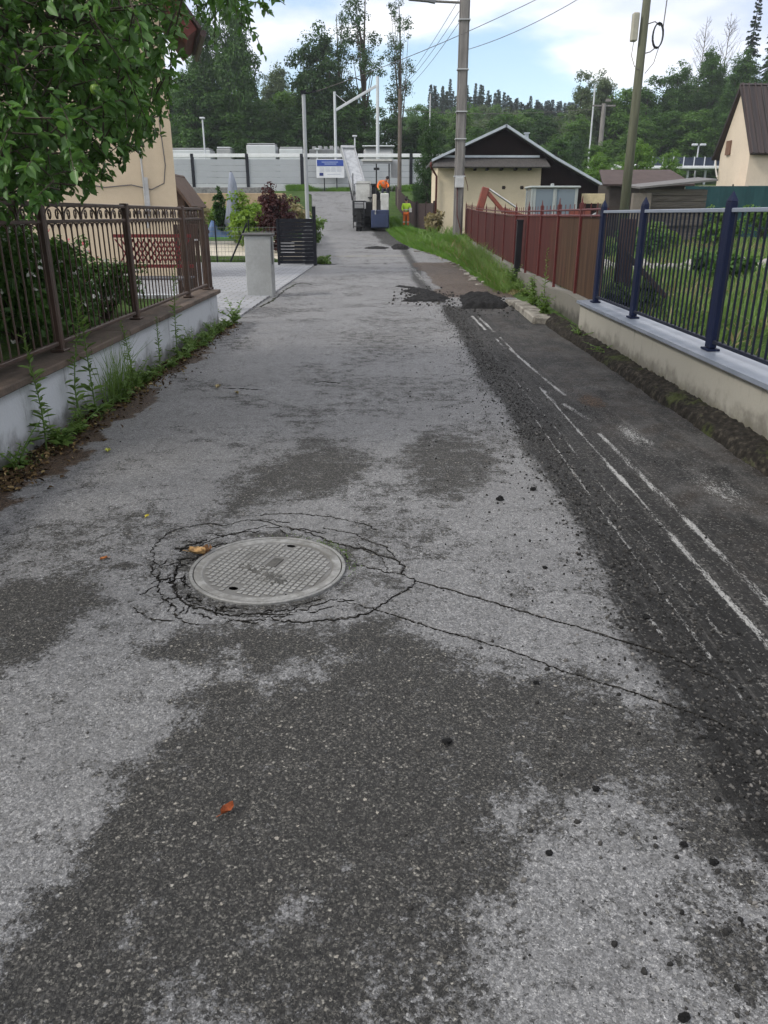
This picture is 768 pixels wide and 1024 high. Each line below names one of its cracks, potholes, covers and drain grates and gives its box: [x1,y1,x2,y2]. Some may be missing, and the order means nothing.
manhole cover [189,537,346,606]
crack [133,513,731,730]
